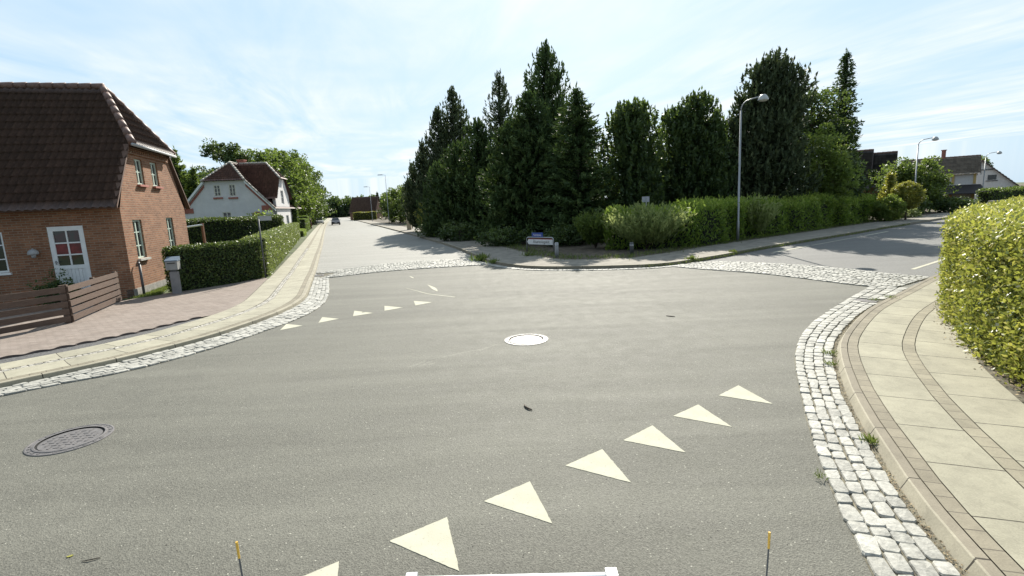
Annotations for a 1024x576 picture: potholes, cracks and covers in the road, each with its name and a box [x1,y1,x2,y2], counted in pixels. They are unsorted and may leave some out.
manhole cover [23,424,115,456]
manhole cover [504,334,548,346]
